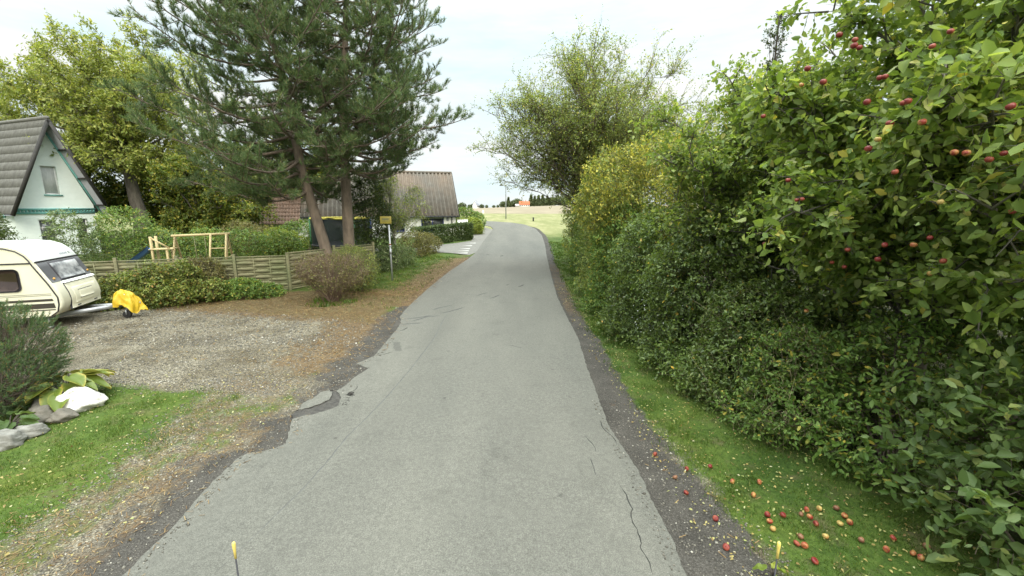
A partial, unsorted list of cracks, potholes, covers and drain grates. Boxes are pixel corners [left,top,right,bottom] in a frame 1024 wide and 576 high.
crack [619,484,653,574]
